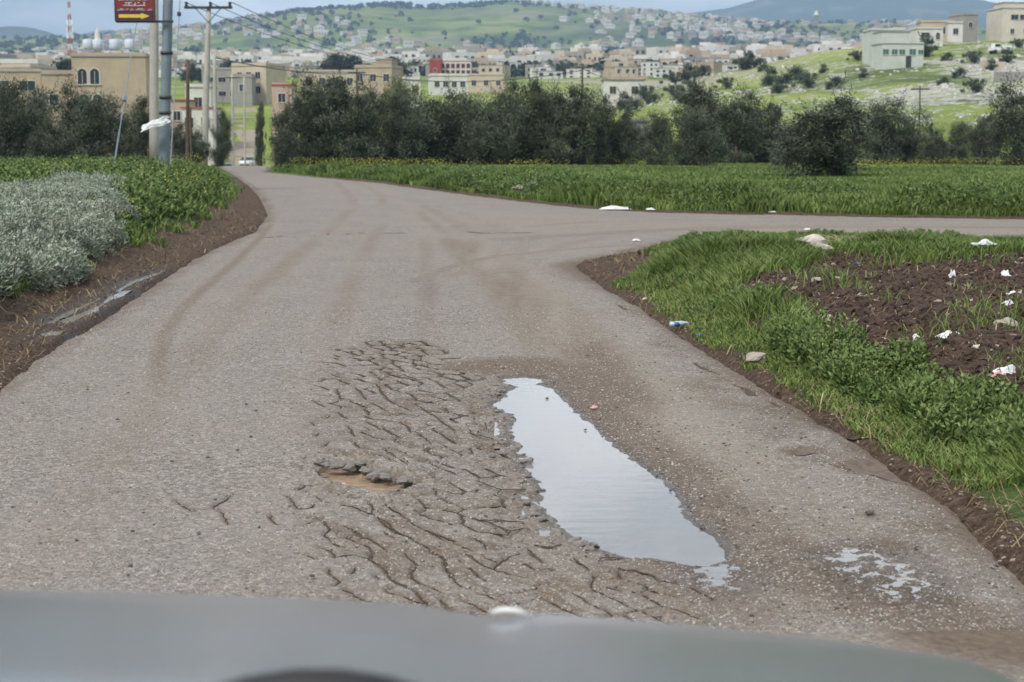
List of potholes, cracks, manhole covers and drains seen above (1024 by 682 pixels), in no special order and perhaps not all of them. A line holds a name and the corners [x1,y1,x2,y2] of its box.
crack [270,341,714,623]
pothole [463,377,726,566]
crack [176,494,233,523]
pothole [315,456,413,492]
